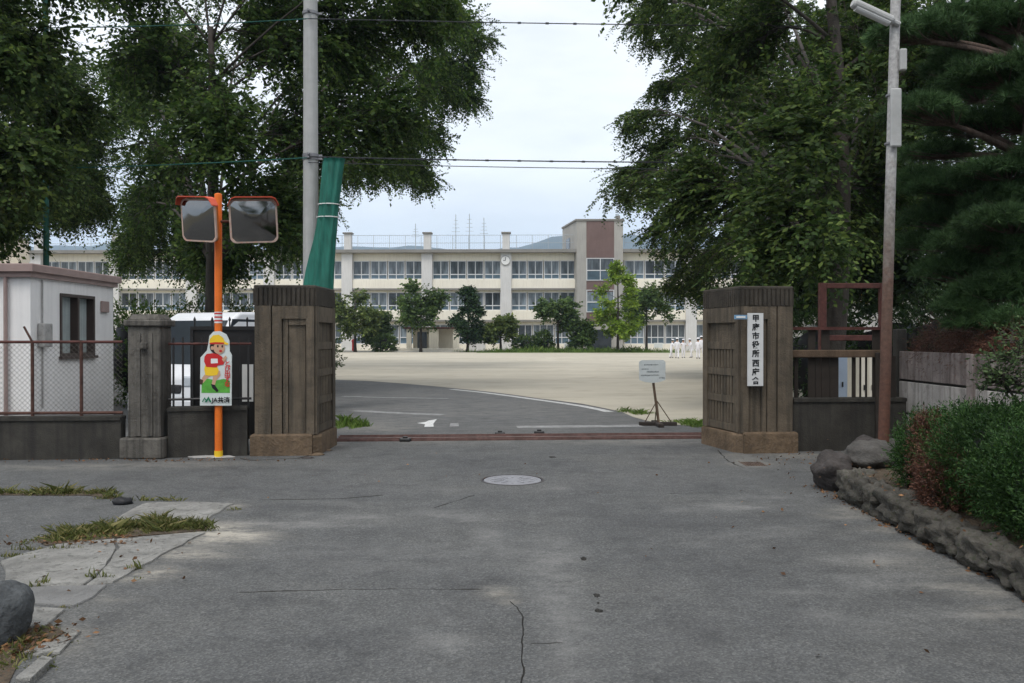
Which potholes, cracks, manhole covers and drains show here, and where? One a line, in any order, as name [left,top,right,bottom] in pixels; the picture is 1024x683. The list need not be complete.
manhole cover [480,475,544,486]
crack [510,601,559,683]
